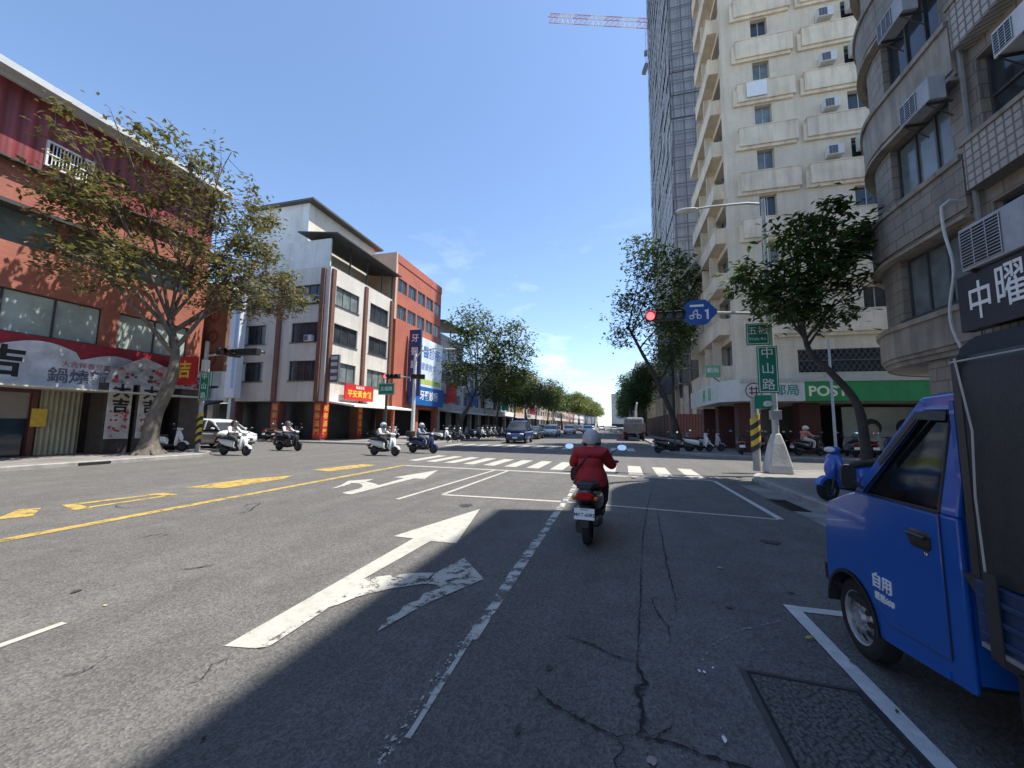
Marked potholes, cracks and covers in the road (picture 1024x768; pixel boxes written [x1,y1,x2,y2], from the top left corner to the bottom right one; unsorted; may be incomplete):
crack [529,495,751,768]
drain grate [768,499,812,512]
